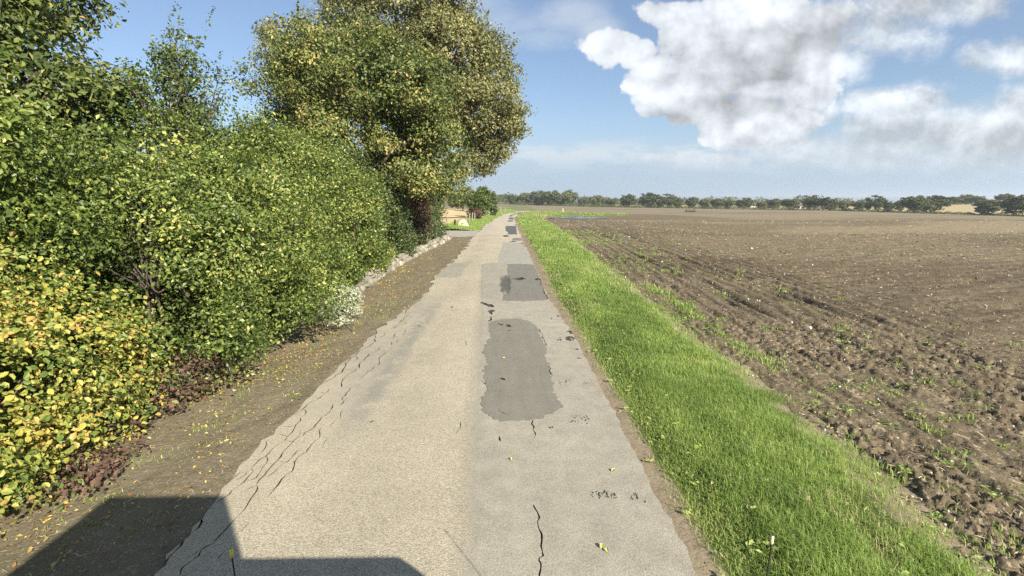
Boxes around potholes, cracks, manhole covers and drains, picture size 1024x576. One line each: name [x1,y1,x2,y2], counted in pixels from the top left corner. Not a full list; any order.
crack [153,295,425,576]
crack [533,504,544,576]
